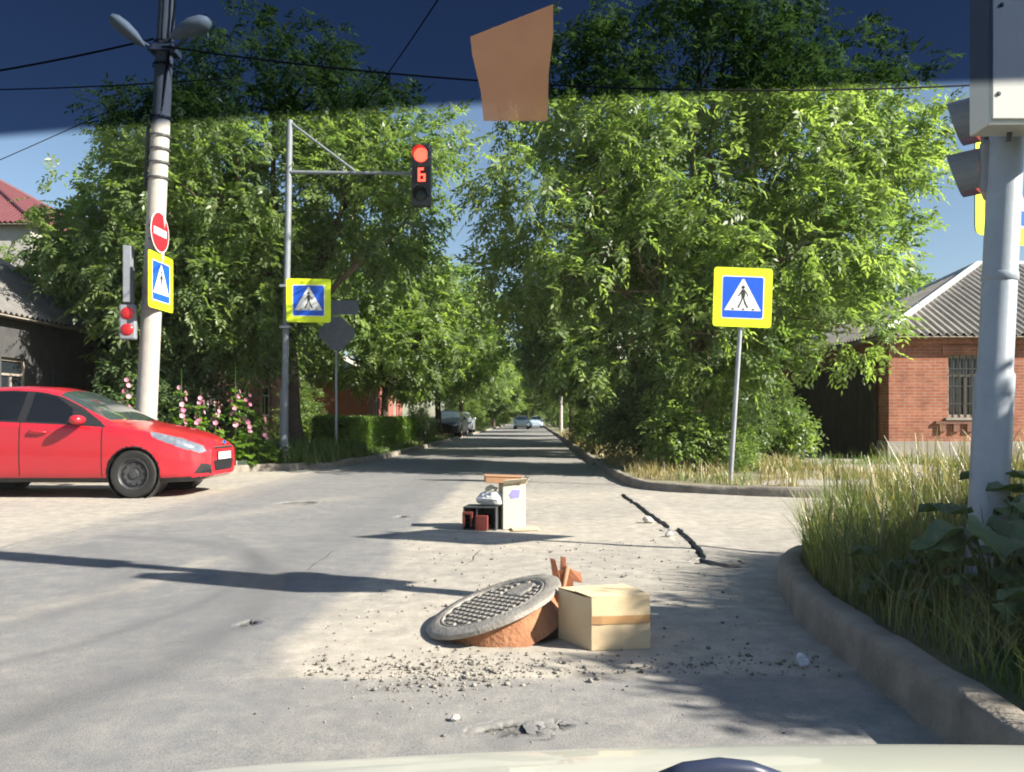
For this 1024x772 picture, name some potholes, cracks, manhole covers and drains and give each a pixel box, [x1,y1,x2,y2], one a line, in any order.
pothole [226,618,270,629]
pothole [464,717,559,742]
crack [296,550,343,572]
crack [446,548,491,566]
